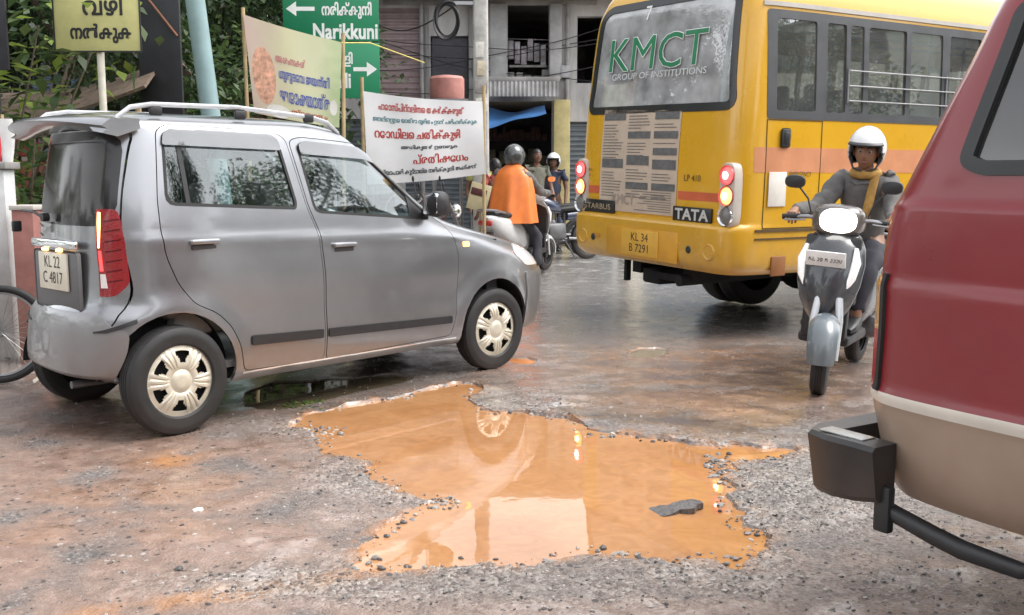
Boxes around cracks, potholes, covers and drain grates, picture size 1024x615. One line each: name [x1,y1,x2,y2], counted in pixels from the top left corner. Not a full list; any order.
pothole [242,373,413,410]
pothole [284,381,804,573]
pothole [628,347,671,357]
